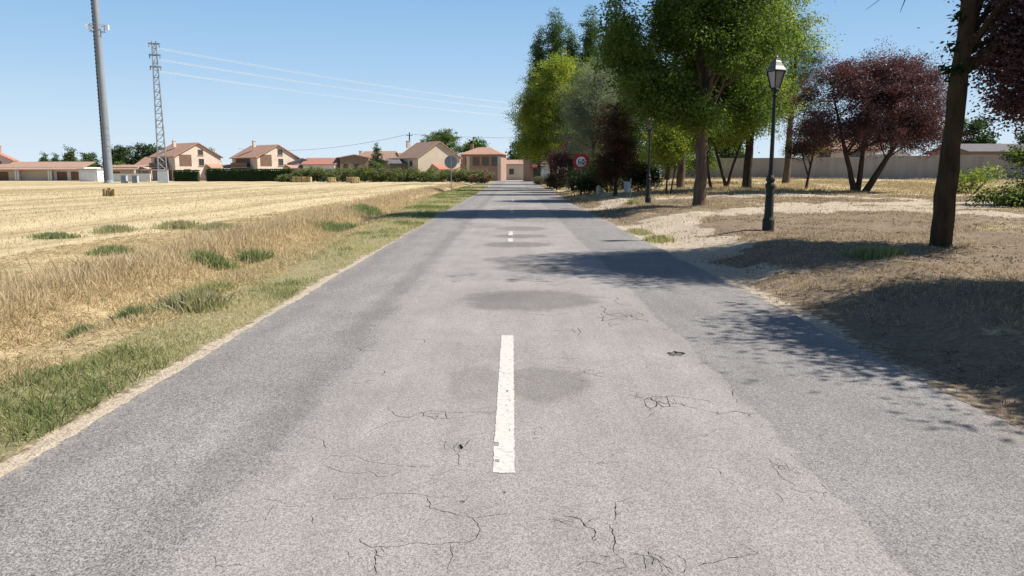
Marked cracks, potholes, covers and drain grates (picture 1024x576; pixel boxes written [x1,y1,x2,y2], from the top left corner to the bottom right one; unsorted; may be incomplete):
crack [768,455,829,500]
crack [550,495,758,575]
crack [599,297,648,326]
crack [373,409,487,430]
crack [636,389,751,418]
